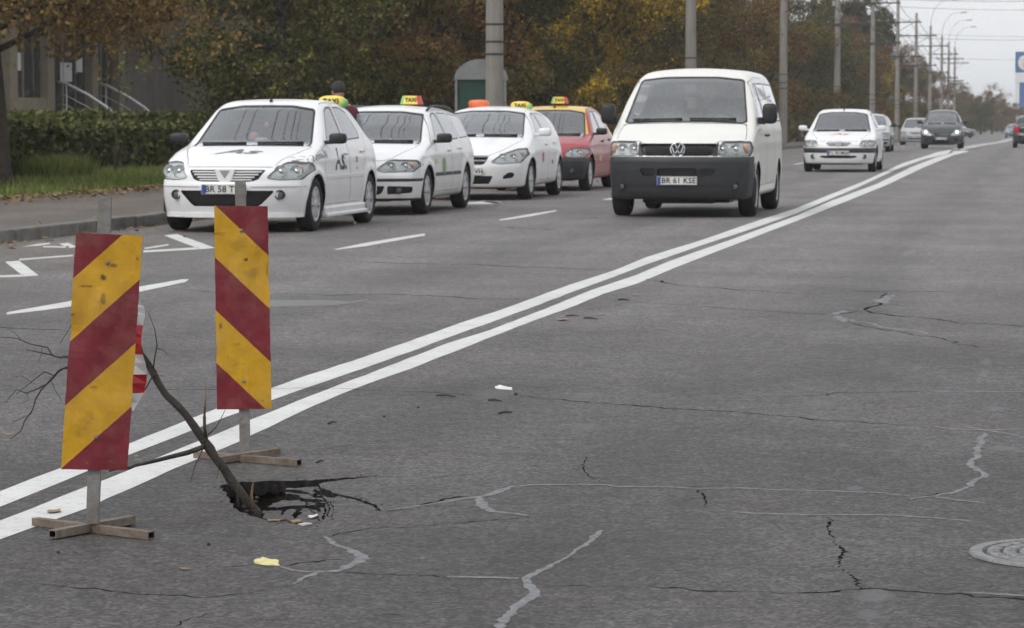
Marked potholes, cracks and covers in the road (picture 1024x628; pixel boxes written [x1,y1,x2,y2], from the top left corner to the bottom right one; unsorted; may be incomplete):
pothole [214,475,383,527]
crack [609,279,1017,348]
manhole cover [969,538,1024,567]
crack [655,486,1024,600]
crack [510,394,1024,438]
